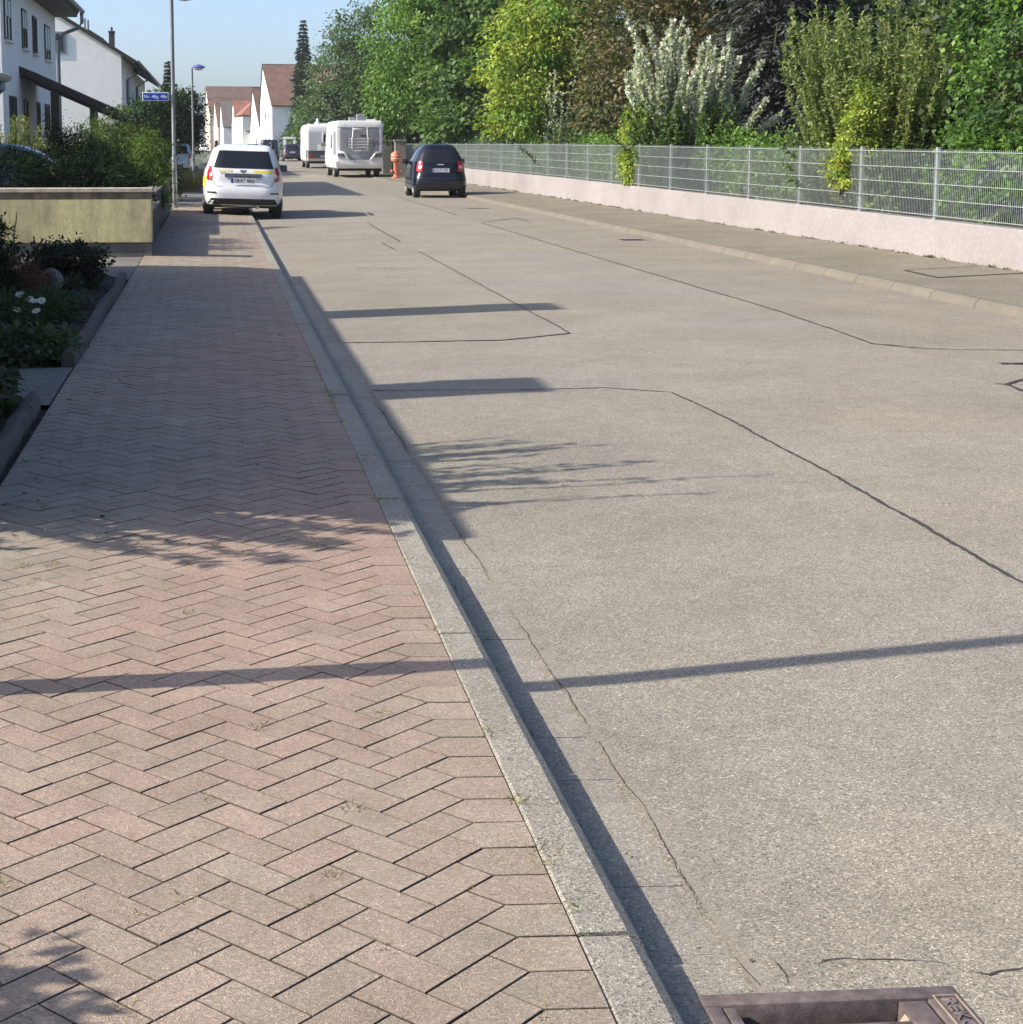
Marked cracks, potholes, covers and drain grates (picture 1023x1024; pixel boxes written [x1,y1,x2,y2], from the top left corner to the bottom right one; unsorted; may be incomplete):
drain grate [699,986,985,1024]
crack [773,957,1022,983]
